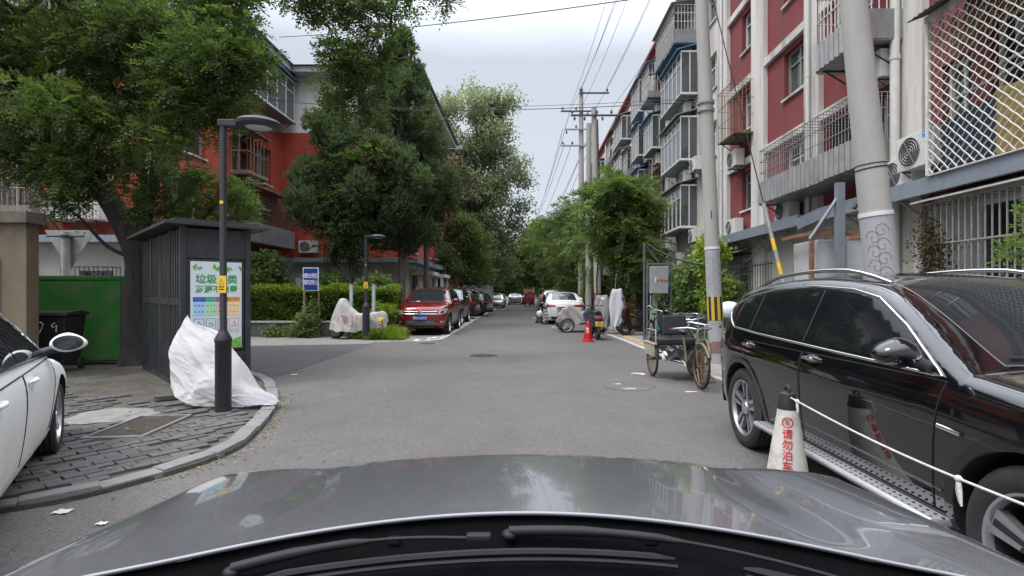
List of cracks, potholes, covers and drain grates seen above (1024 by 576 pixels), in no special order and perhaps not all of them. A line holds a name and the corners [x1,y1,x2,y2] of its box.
manhole cover [79,414,193,440]
manhole cover [64,408,160,424]
manhole cover [604,382,656,391]
